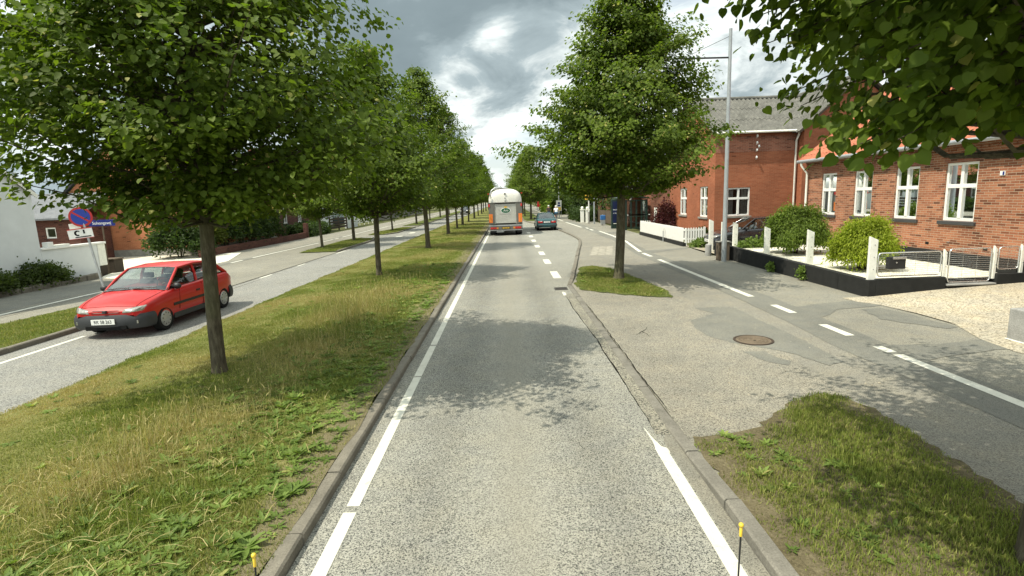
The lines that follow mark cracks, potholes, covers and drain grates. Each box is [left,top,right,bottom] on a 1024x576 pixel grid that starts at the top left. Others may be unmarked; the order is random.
manhole cover [733,335,774,345]
